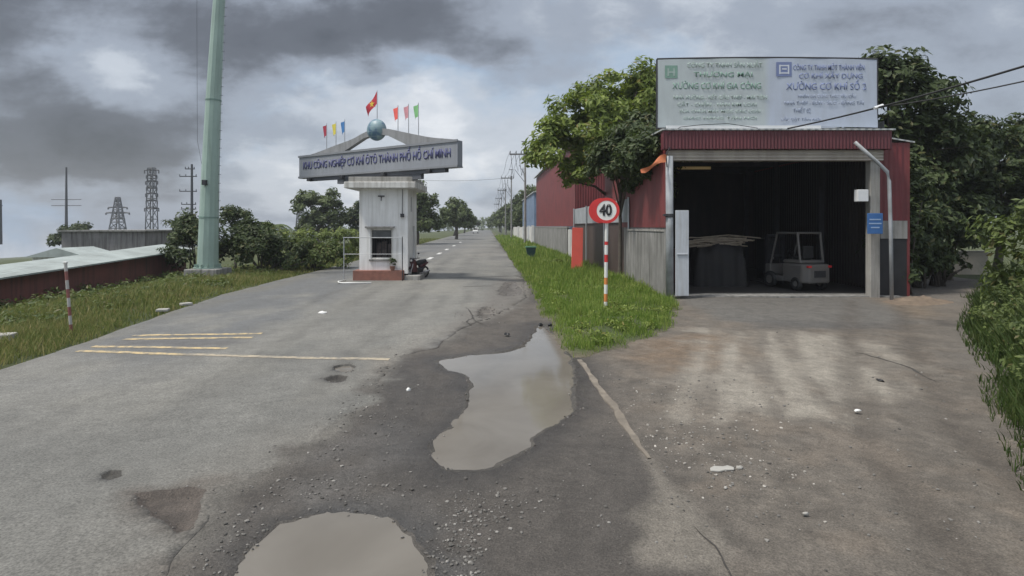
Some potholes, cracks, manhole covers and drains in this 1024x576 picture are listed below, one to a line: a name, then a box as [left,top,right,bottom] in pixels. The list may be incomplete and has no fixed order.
pothole [324,374,348,383]
pothole [427,325,584,476]
pothole [224,503,454,576]
pothole [333,364,358,373]
crack [855,352,935,381]
crack [694,526,732,576]
